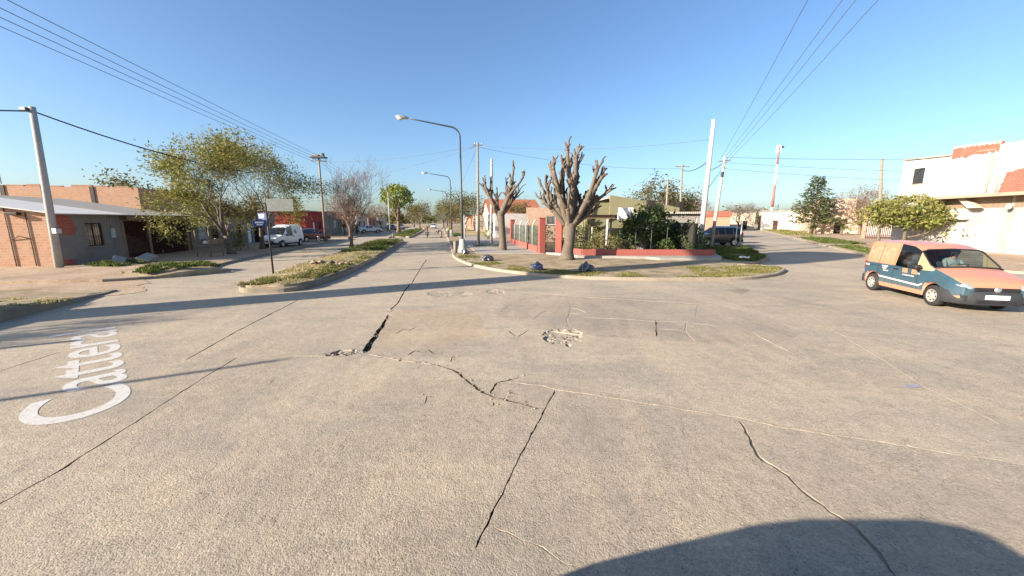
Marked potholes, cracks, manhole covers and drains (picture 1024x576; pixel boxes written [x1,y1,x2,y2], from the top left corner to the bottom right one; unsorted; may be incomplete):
crack [408,350,544,410]
pothole [542,326,583,347]
crack [739,421,896,576]
